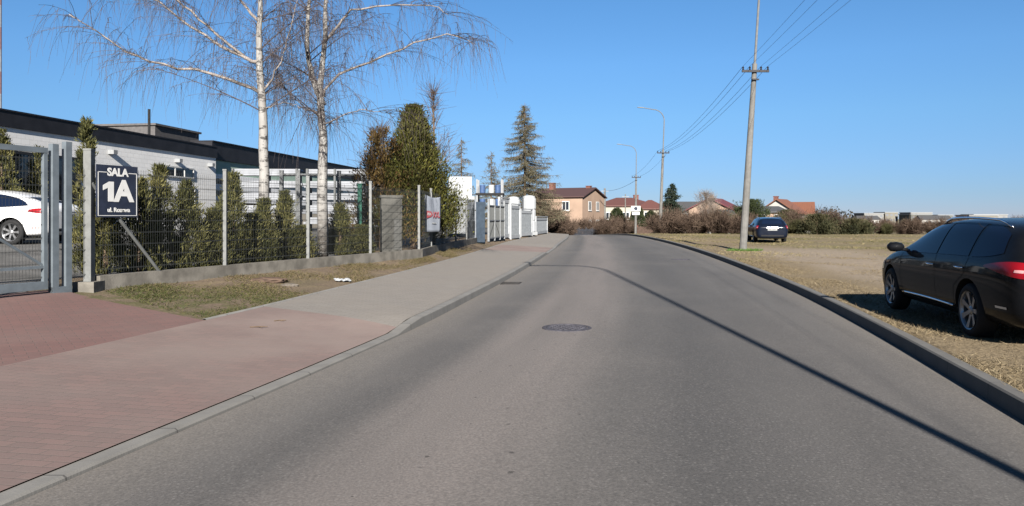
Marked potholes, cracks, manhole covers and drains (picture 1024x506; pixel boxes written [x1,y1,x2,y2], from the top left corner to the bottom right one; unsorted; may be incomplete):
manhole cover [542,324,592,332]
